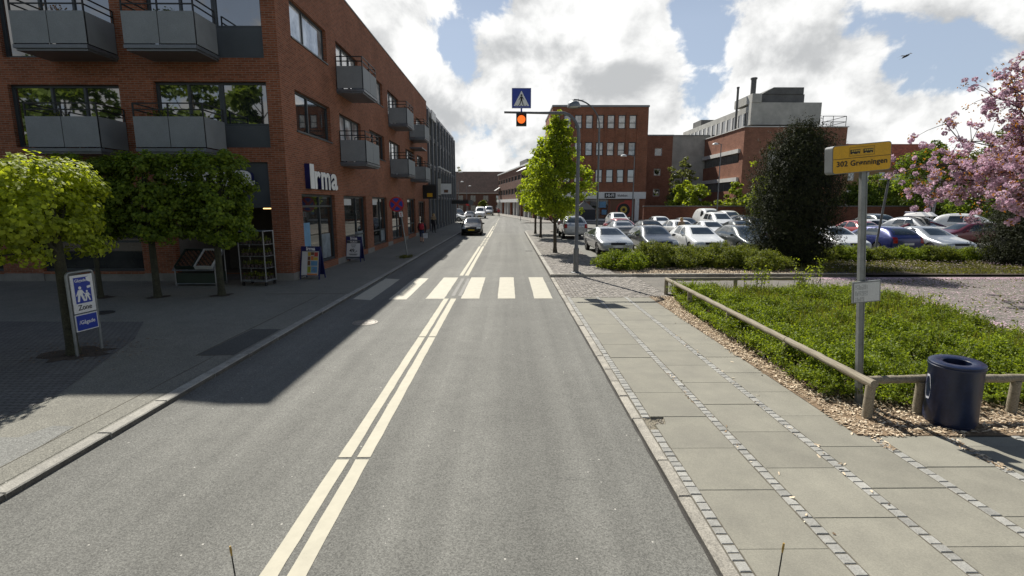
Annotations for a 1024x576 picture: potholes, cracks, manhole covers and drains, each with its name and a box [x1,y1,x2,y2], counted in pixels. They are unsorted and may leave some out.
pothole [642,418,665,430]
